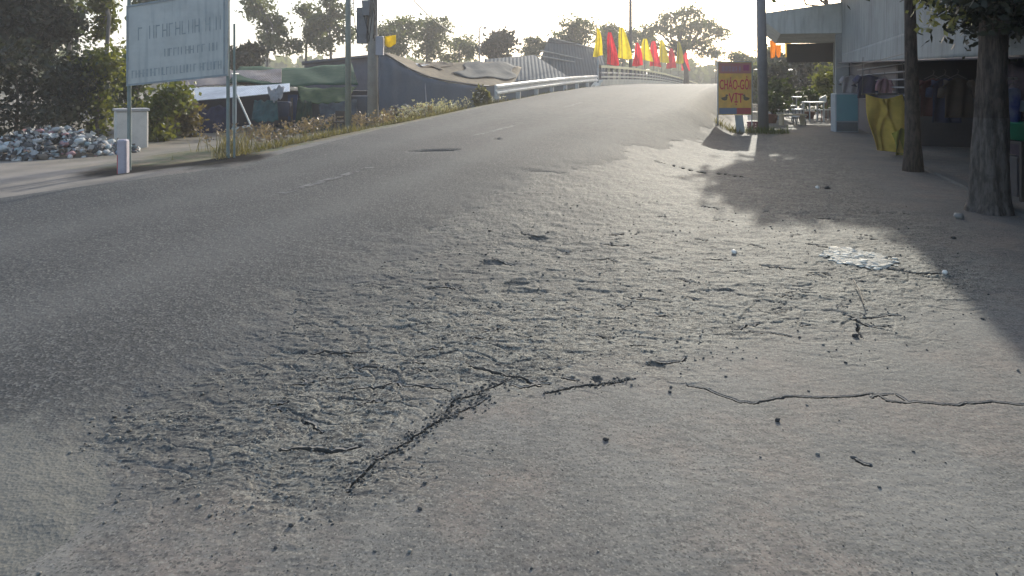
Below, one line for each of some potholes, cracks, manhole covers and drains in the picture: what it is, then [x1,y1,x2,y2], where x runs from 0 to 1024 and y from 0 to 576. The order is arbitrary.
crack [688,385,1024,407]
crack [268,204,907,498]
